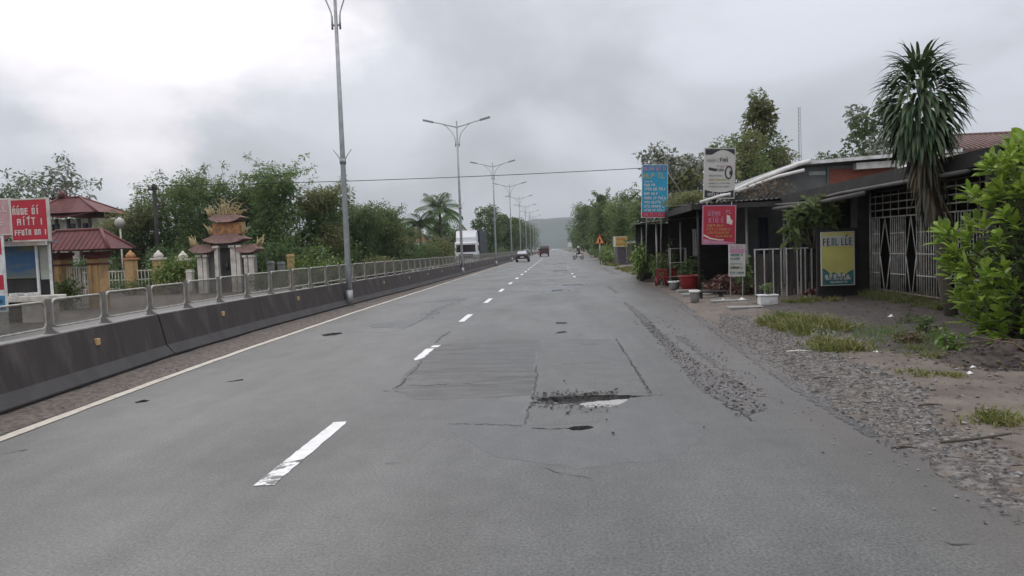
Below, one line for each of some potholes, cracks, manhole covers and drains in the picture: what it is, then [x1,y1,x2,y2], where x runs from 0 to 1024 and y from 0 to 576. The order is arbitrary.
pothole [535,394,642,404]
crack [447,366,609,429]
